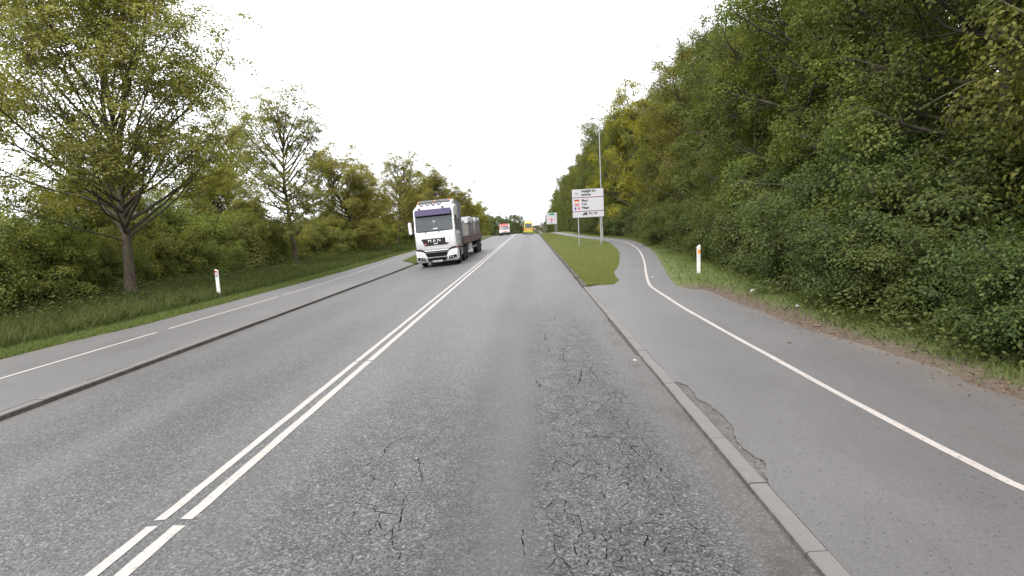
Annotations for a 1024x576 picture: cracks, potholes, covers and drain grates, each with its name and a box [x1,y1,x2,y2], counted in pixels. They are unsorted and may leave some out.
crack [301,436,436,567]
pothole [674,381,769,486]
crack [521,316,747,576]
